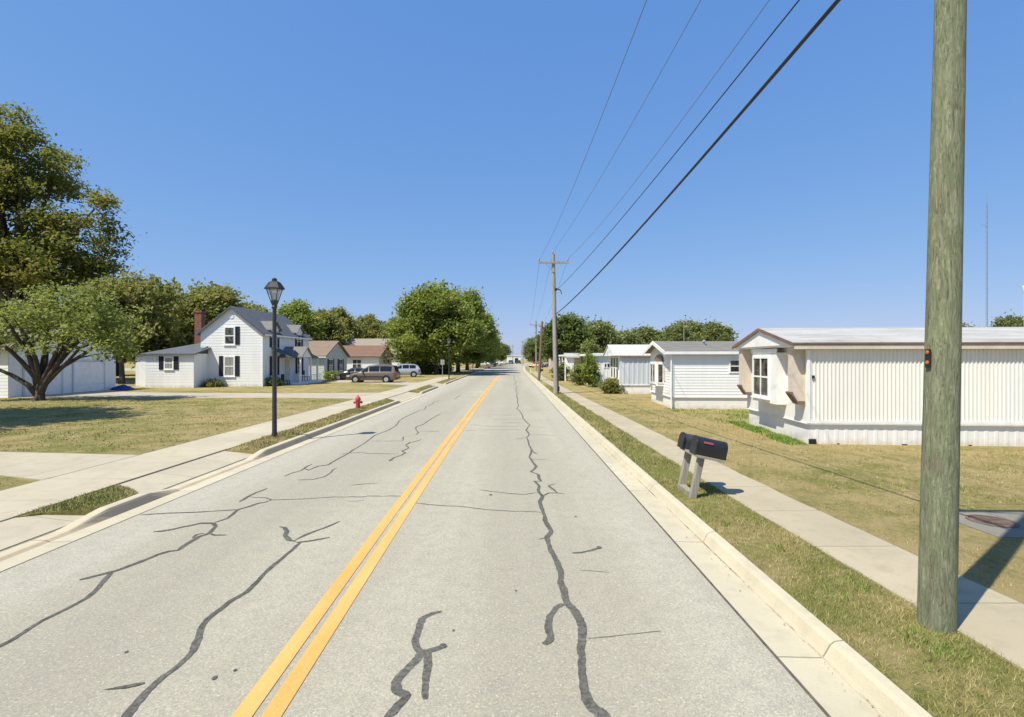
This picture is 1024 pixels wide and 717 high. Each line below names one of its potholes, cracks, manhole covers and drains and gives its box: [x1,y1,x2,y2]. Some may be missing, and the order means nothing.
crack [143,483,370,538]
crack [590,630,661,638]
manhole cover [965,514,1020,528]
crack [285,397,457,480]
crack [0,572,113,647]
